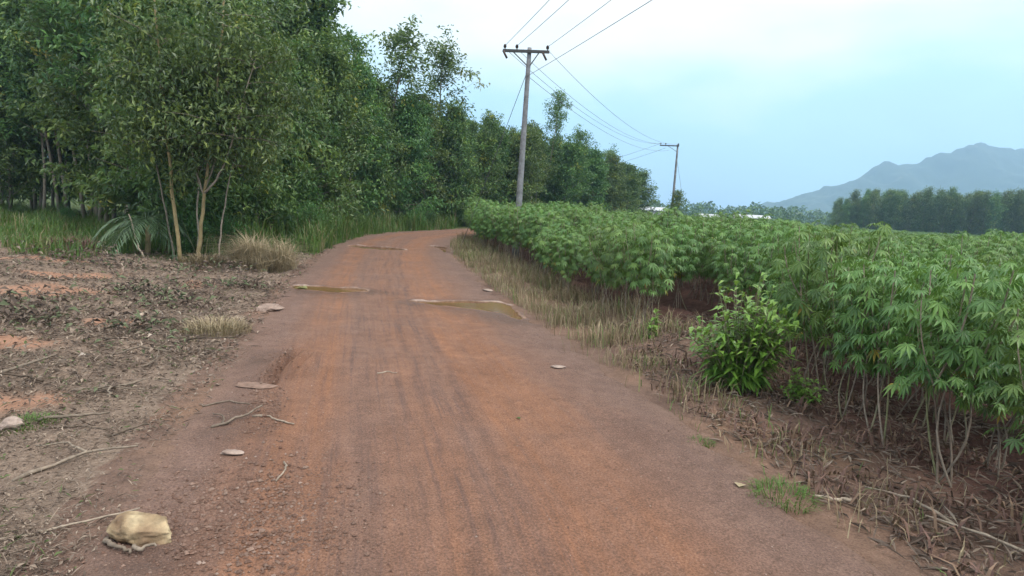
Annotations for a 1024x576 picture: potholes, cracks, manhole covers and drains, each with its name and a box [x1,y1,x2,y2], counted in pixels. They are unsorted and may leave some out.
pothole [291,284,370,293]
pothole [409,299,526,320]
